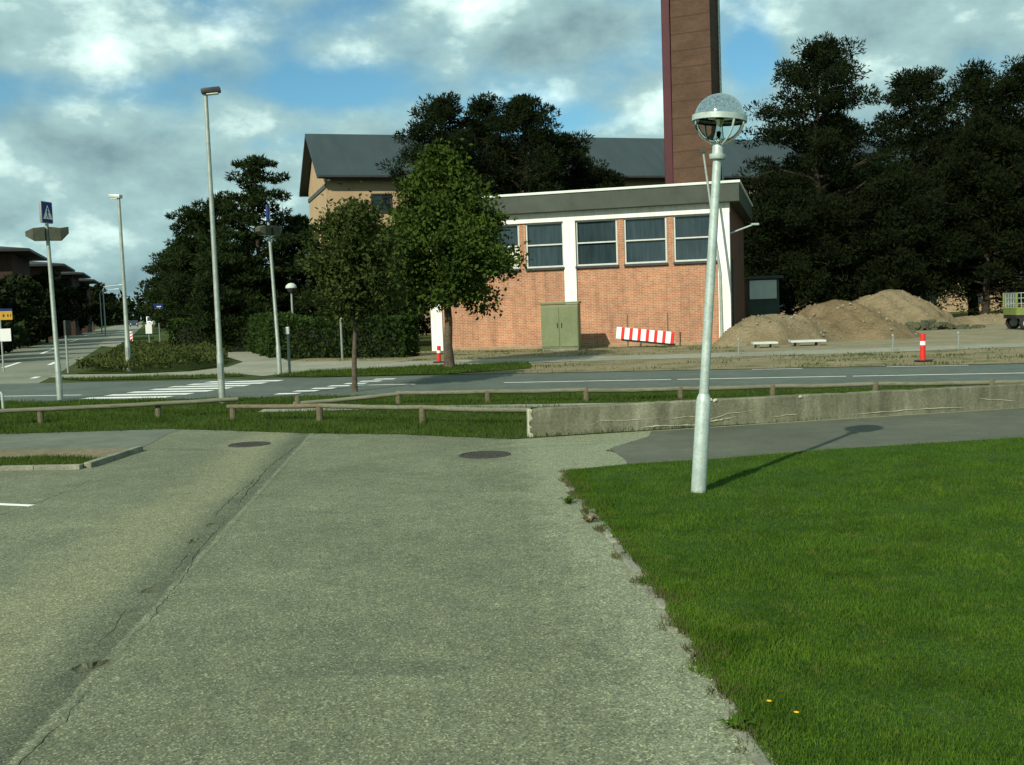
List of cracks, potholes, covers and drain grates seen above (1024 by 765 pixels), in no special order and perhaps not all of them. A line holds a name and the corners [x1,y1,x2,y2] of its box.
crack [19,431,369,765]
pothole [71,659,112,673]
manhole cover [459,451,511,459]
